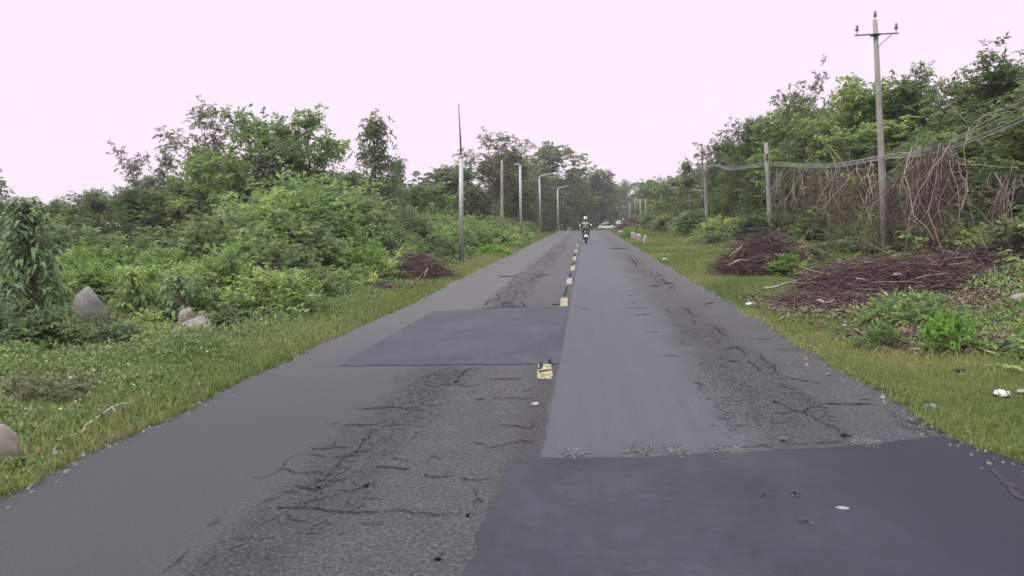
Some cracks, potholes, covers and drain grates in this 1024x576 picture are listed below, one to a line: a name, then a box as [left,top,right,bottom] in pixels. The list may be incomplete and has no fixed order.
crack [484,245,568,306]
crack [163,542,260,572]
crack [472,420,534,448]
crack [497,359,554,398]
crack [608,248,675,290]
crack [223,366,492,565]
crack [665,301,944,445]
